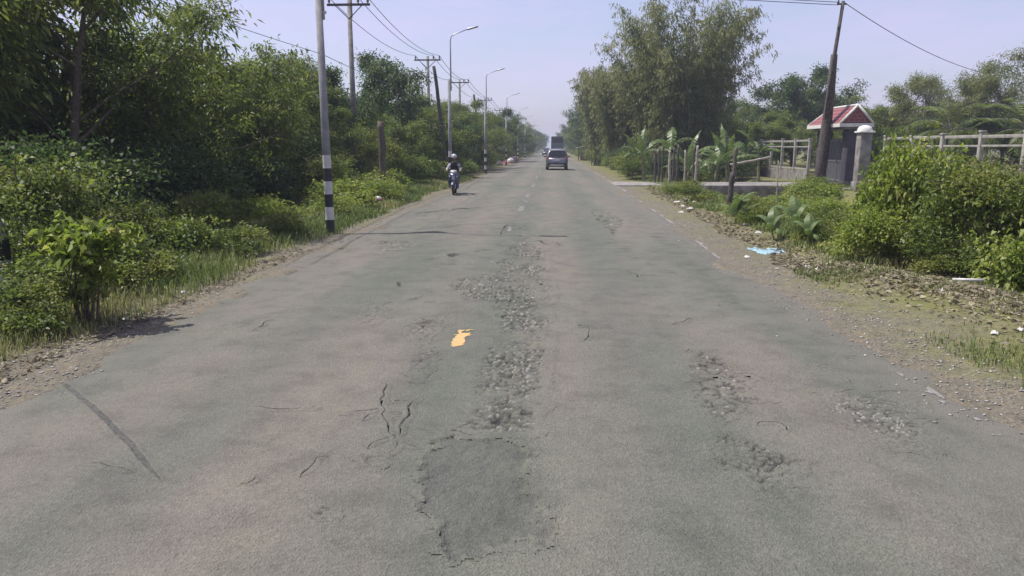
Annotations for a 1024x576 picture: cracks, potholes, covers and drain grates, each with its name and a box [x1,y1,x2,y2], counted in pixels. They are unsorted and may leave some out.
crack [254,206,614,523]
